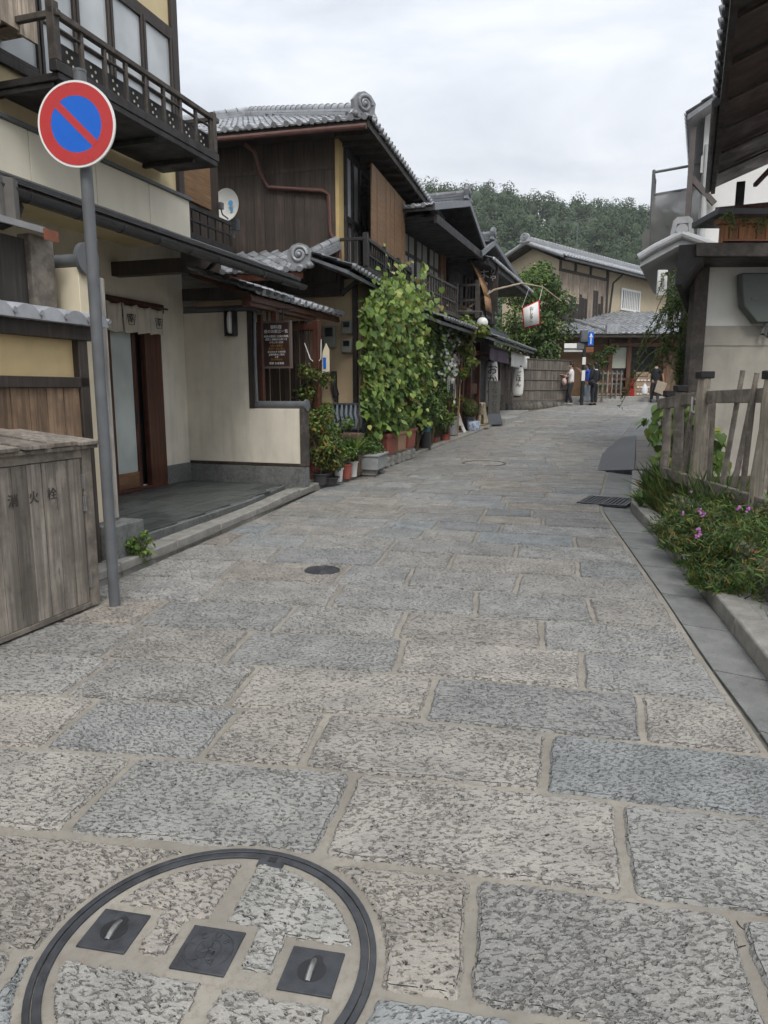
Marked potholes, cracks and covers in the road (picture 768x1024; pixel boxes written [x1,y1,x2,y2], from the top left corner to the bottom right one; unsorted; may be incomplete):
manhole cover [21,848,376,1024]
drain grate [577,495,631,509]
manhole cover [302,565,342,575]
